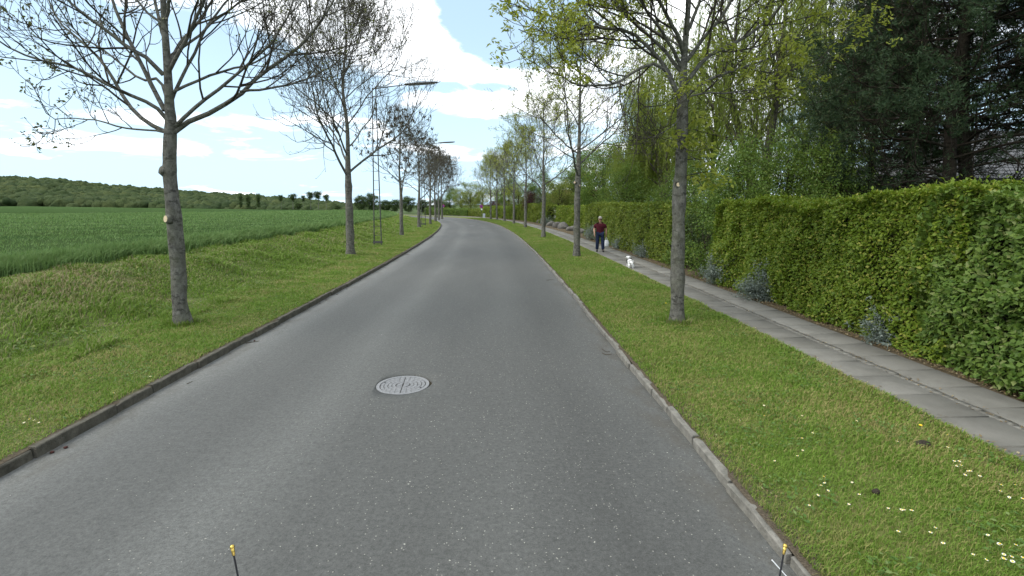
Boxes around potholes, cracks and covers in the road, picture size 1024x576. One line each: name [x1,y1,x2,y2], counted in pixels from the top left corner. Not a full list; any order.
manhole cover [376,376,432,394]
